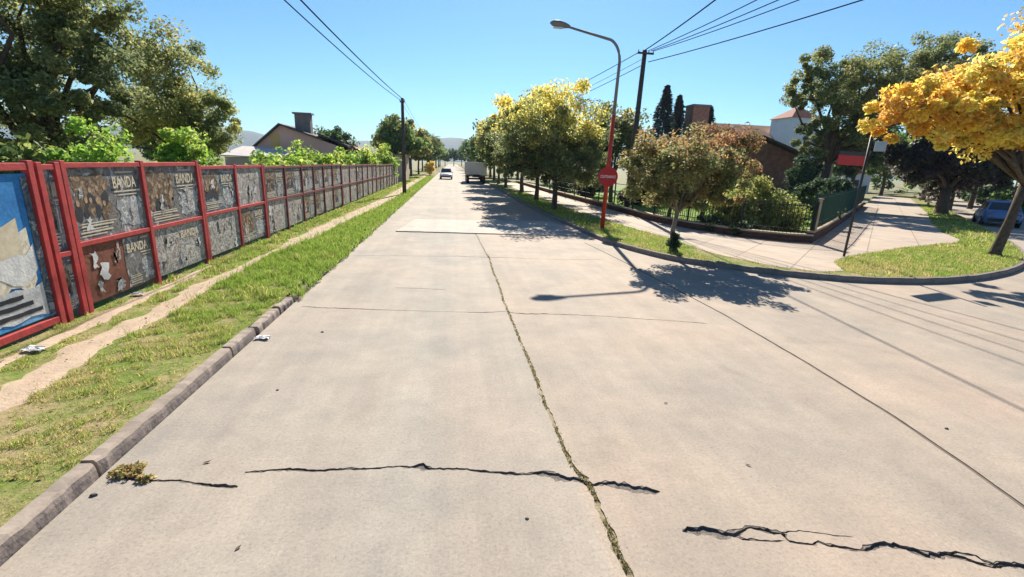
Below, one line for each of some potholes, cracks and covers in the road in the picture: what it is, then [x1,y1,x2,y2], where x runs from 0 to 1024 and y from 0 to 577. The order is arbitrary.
crack [107,234,708,577]
crack [682,525,1024,569]
